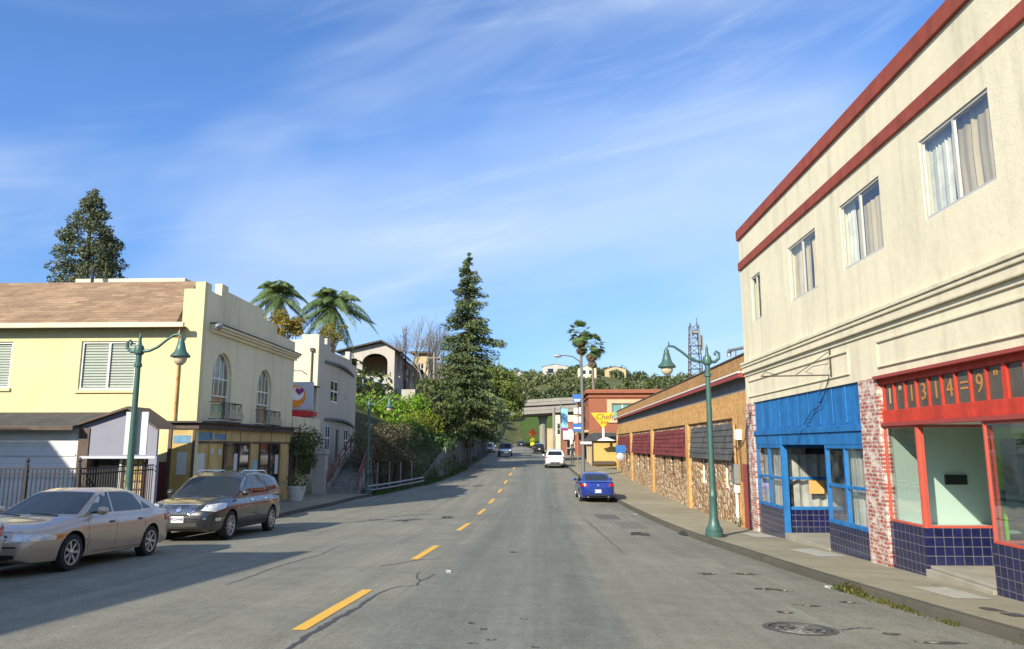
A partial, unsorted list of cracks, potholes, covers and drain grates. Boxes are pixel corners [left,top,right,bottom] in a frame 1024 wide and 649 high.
manhole cover [762,622,839,636]
crack [285,558,442,649]
